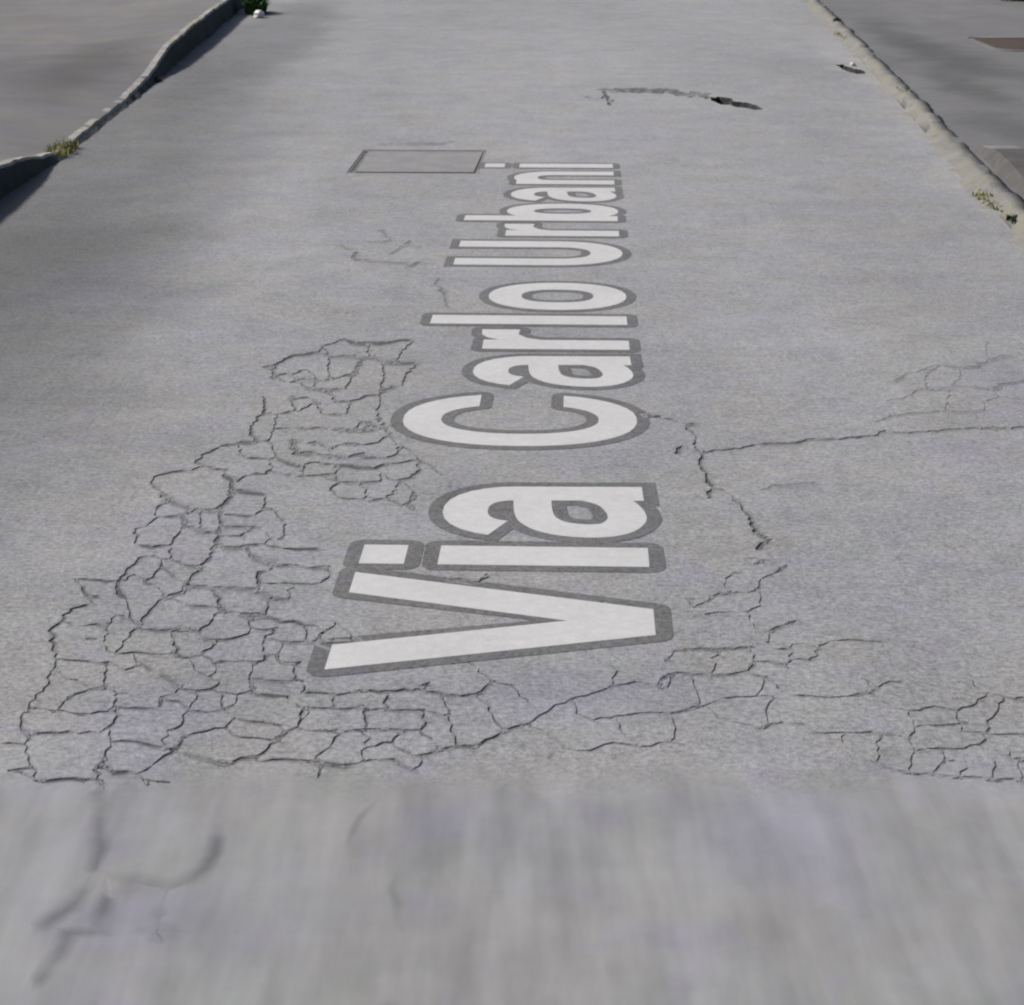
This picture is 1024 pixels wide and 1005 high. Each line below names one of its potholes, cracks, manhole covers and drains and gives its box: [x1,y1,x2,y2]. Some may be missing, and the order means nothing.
crack [0,338,1024,992]
pothole [837,64,866,74]
crack [335,229,454,308]
manhole cover [348,150,486,174]
crack [583,87,713,105]
